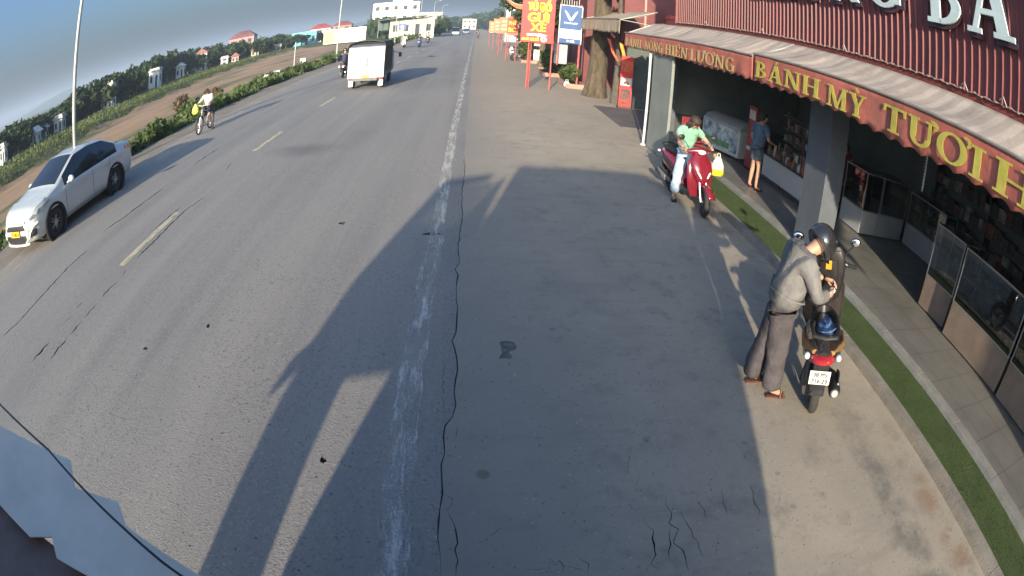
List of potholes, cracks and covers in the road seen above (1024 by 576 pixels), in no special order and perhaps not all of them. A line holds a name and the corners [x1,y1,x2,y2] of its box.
pothole [499,341,516,359]
crack [7,249,89,333]
crack [35,191,203,360]
crack [437,158,465,575]
crack [624,452,728,573]
